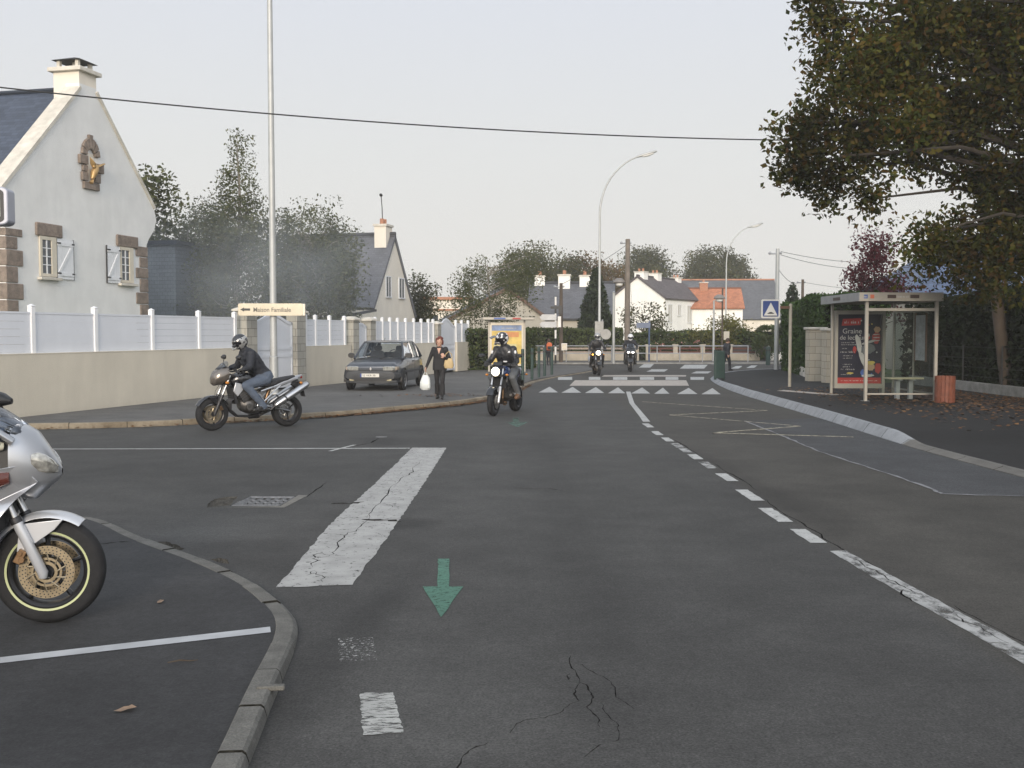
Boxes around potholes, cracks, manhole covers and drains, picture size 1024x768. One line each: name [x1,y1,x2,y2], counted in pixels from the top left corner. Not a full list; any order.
crack [511,656,633,757]
drain grate [230,496,294,506]
crack [854,559,995,644]
crack [307,468,414,578]
pothole [207,496,238,508]
